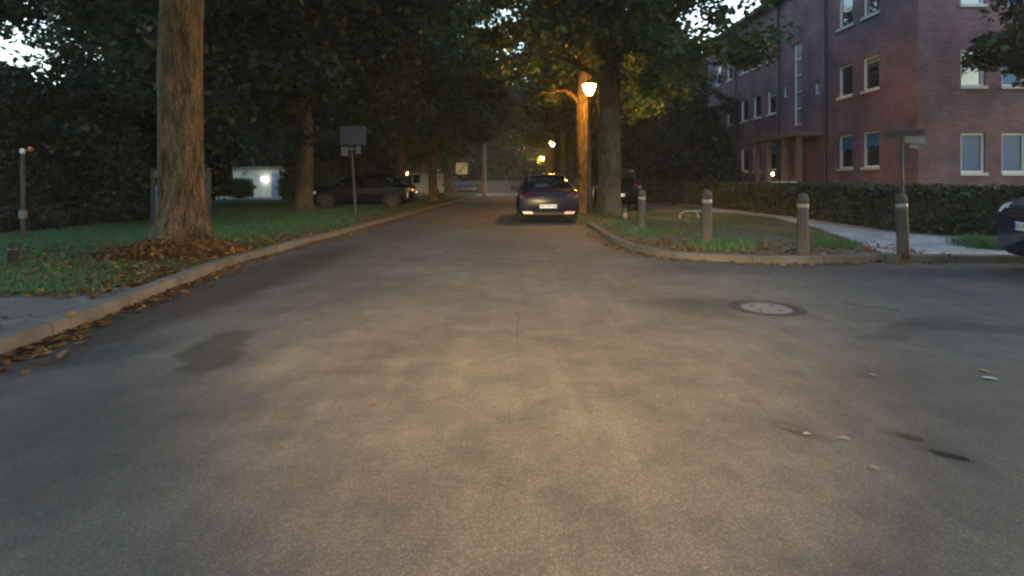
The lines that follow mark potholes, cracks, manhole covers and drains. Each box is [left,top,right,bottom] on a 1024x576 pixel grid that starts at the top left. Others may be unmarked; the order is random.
pothole [893,432,924,441]
pothole [927,448,970,462]
manhole cover [727,300,807,317]
